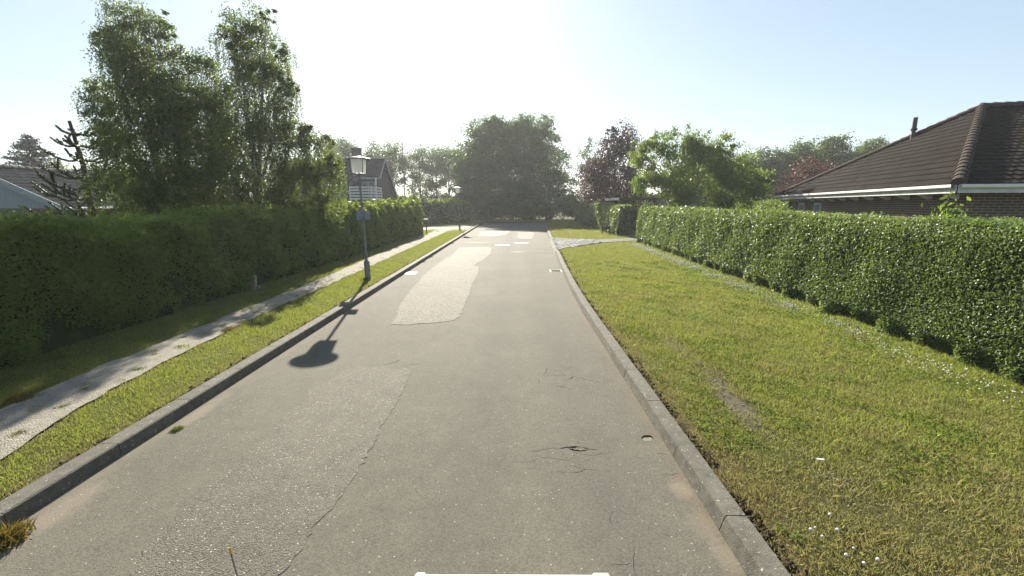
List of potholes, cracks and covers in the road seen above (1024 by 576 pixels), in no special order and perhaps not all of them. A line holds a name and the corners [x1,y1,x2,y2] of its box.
crack [517,442,610,473]
